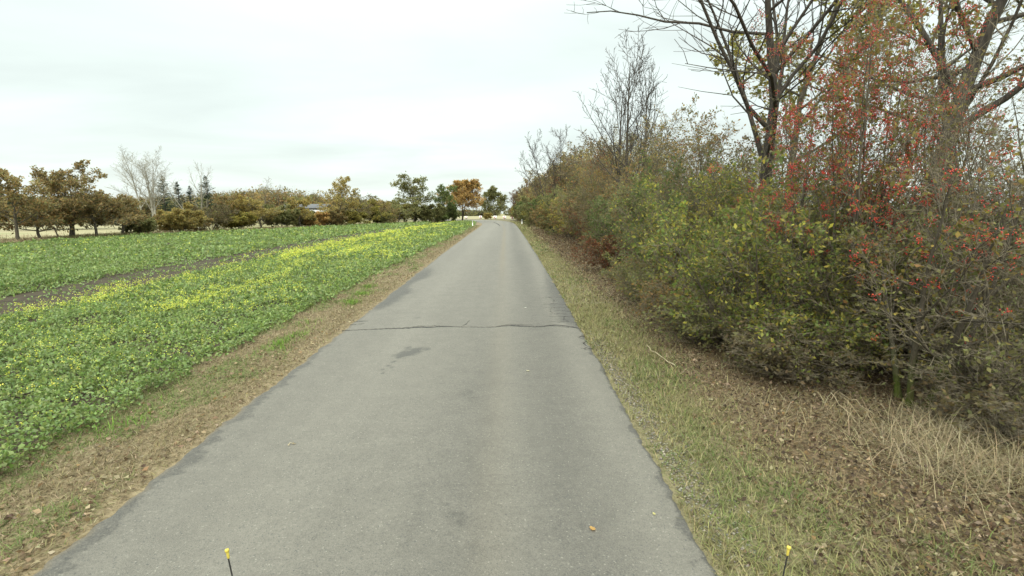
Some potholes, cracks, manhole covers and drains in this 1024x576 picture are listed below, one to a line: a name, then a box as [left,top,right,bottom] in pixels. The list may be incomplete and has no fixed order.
crack [344,297,592,349]
